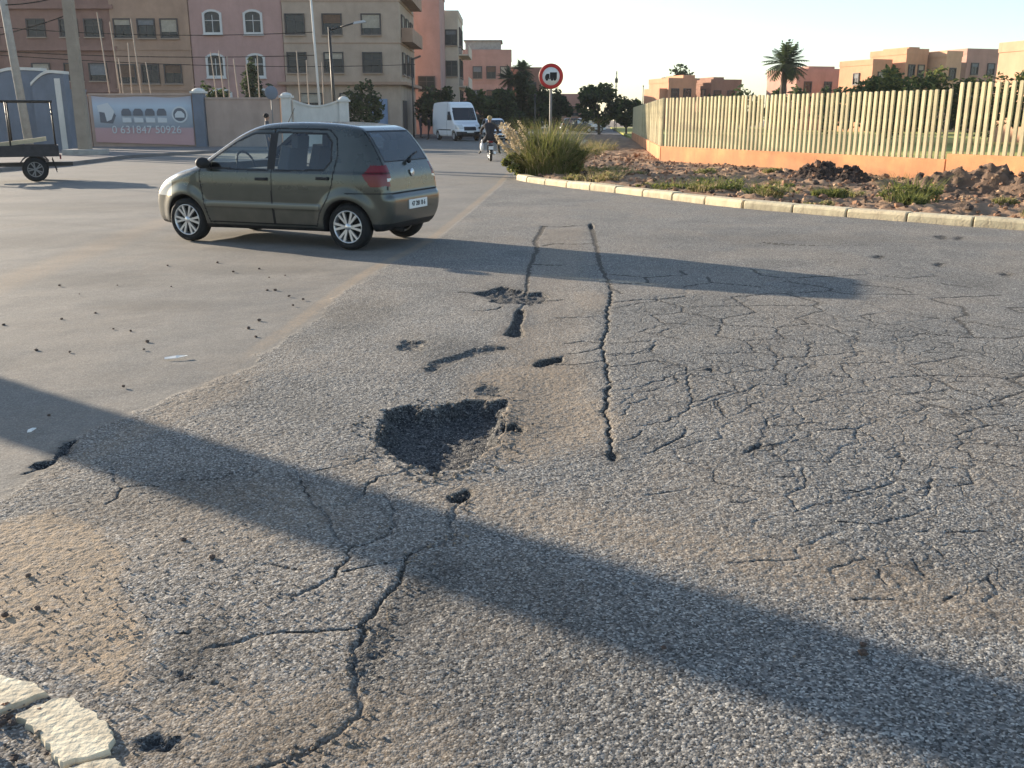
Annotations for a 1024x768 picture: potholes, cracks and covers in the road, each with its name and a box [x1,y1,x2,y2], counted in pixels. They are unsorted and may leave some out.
pothole [396,340,427,351]
crack [911,530,990,577]
pothole [132,733,185,754]
pothole [23,440,77,475]
pothole [471,286,550,306]
pothole [374,399,511,477]
pothole [505,422,525,433]
pothole [446,490,472,504]
crack [106,471,239,504]
crack [300,468,328,498]
crack [524,226,1024,525]
pothole [533,356,565,368]
